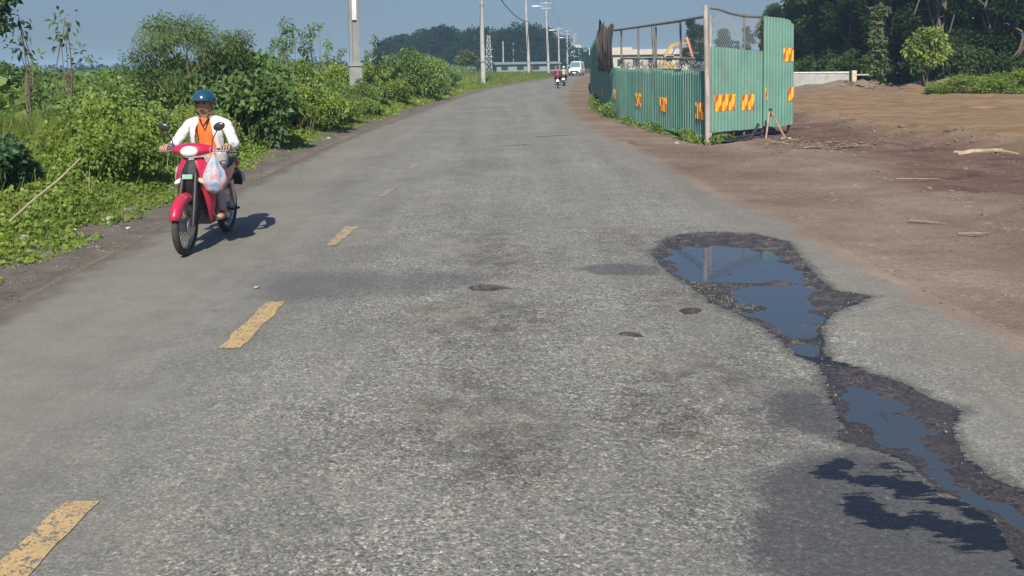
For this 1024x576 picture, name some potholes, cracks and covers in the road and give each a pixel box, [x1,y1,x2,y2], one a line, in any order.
pothole [819,363,1024,570]
pothole [652,232,868,358]
